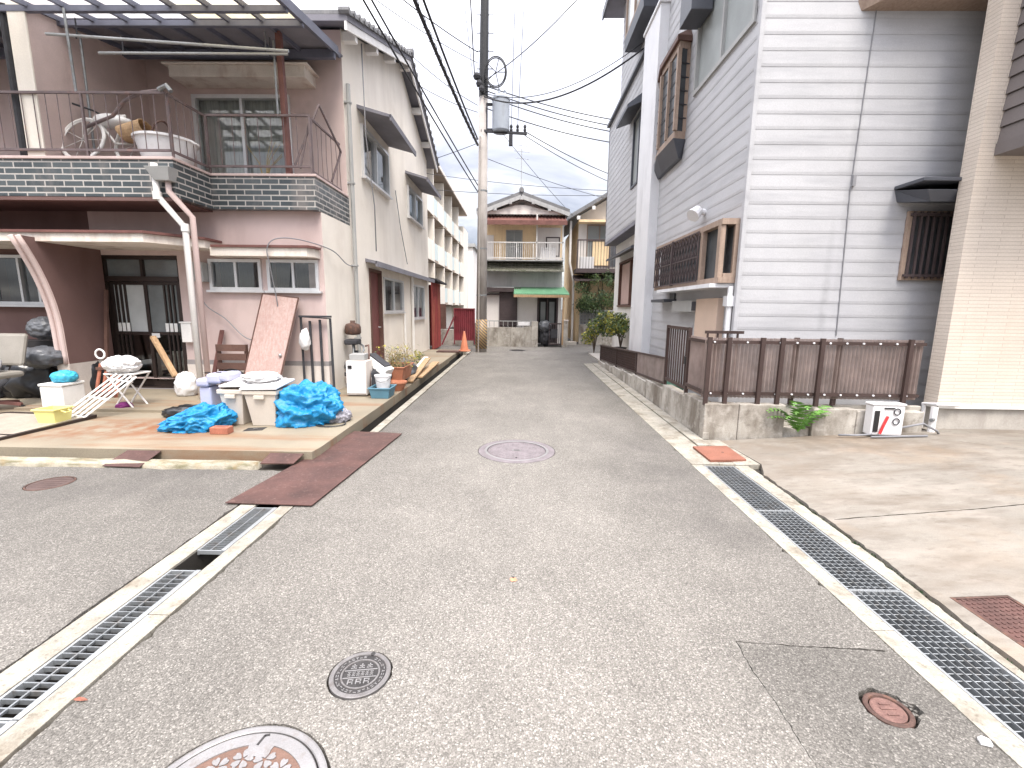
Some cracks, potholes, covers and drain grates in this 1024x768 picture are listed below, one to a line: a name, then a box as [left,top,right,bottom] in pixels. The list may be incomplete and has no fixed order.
manhole cover [478,440,555,463]
utility cover [951,595,1024,648]
manhole cover [329,652,391,701]
manhole cover [23,476,77,491]
utility cover [693,446,746,462]
manhole cover [861,692,919,729]
drain grate [0,570,201,722]
drain grate [704,466,794,511]
manhole cover [167,726,327,768]
drain grate [755,510,901,591]
drain grate [197,507,277,555]
